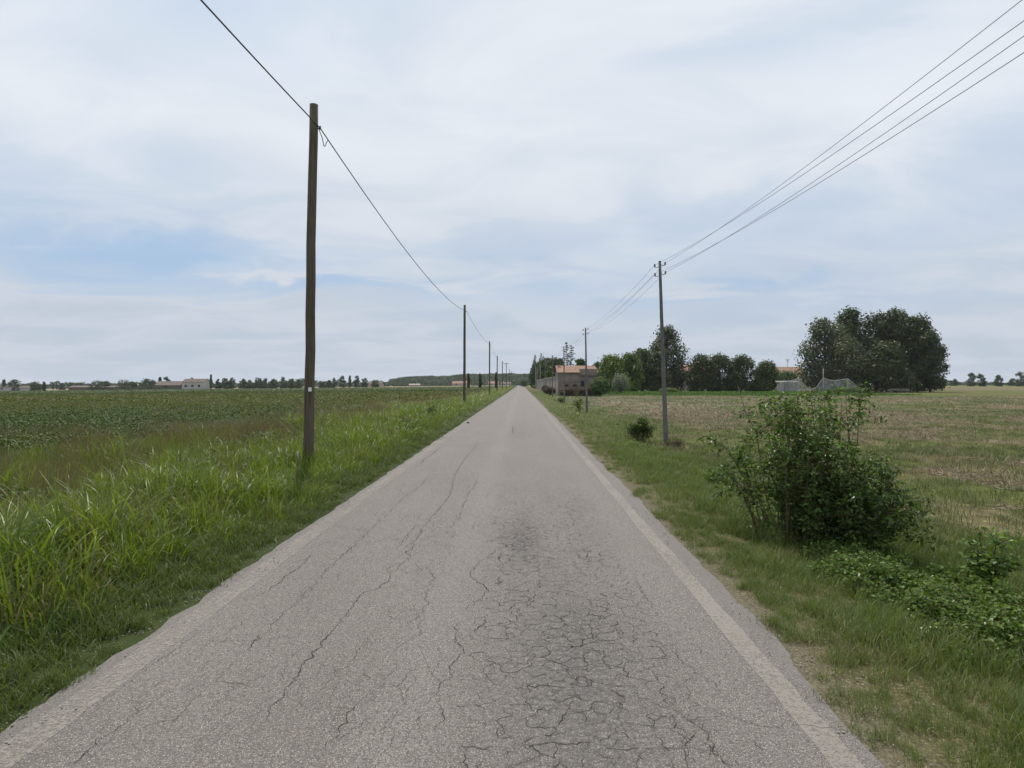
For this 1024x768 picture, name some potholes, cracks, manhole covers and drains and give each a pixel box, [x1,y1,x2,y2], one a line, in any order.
crack [68,450,499,767]
crack [449,480,834,768]
